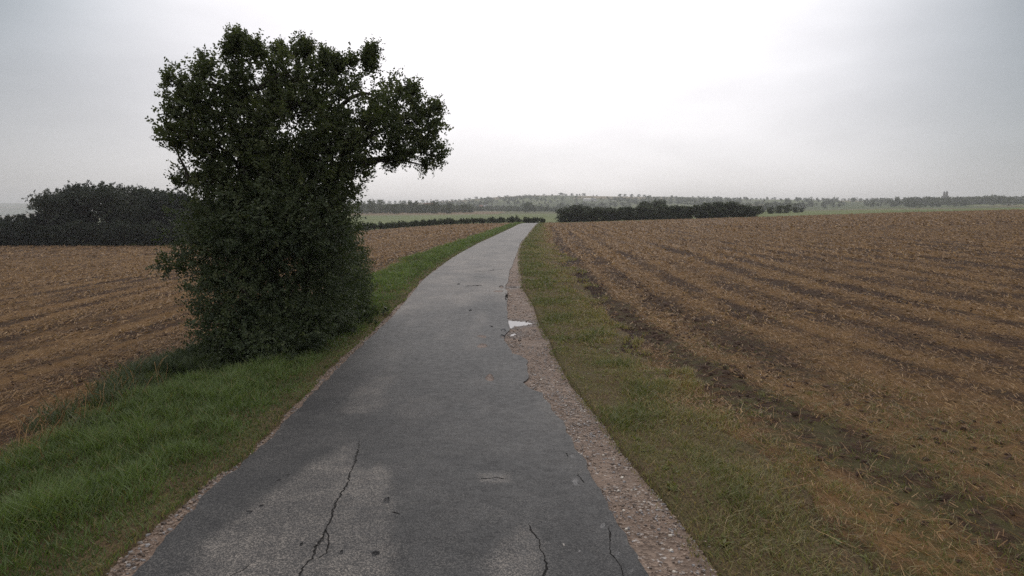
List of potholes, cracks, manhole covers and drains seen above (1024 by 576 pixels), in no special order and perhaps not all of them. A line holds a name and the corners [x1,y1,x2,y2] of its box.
crack [528,524,548,576]
crack [608,528,624,576]
crack [298,441,360,576]
